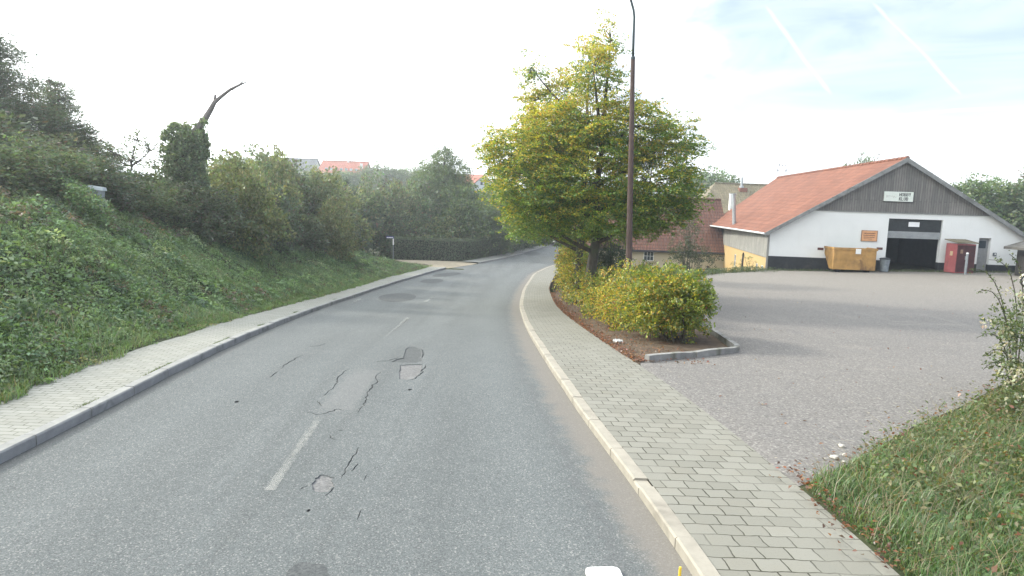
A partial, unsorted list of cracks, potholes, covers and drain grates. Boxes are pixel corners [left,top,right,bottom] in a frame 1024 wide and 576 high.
pothole [312,474,335,493]
crack [299,370,367,496]
pothole [392,347,422,363]
pothole [399,364,423,380]
